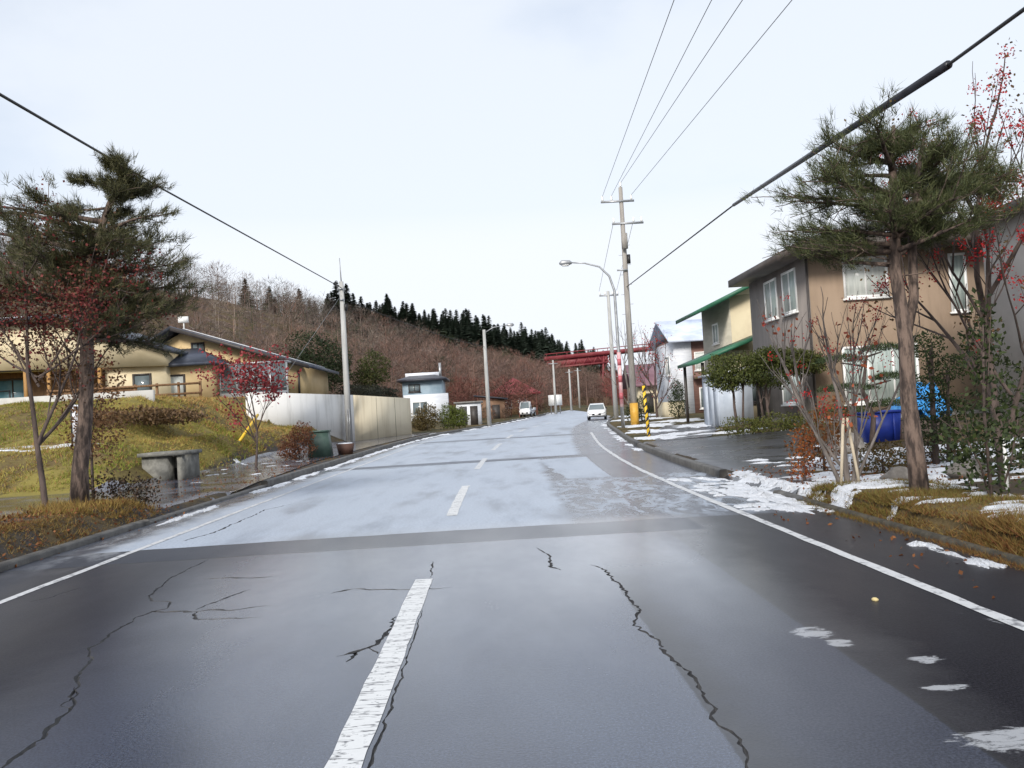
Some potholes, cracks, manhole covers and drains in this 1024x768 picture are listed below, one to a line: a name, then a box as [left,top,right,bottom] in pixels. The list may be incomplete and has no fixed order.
crack [1,561,272,768]
crack [537,548,560,570]
crack [185,504,291,541]
crack [330,562,451,594]
crack [341,612,422,768]
